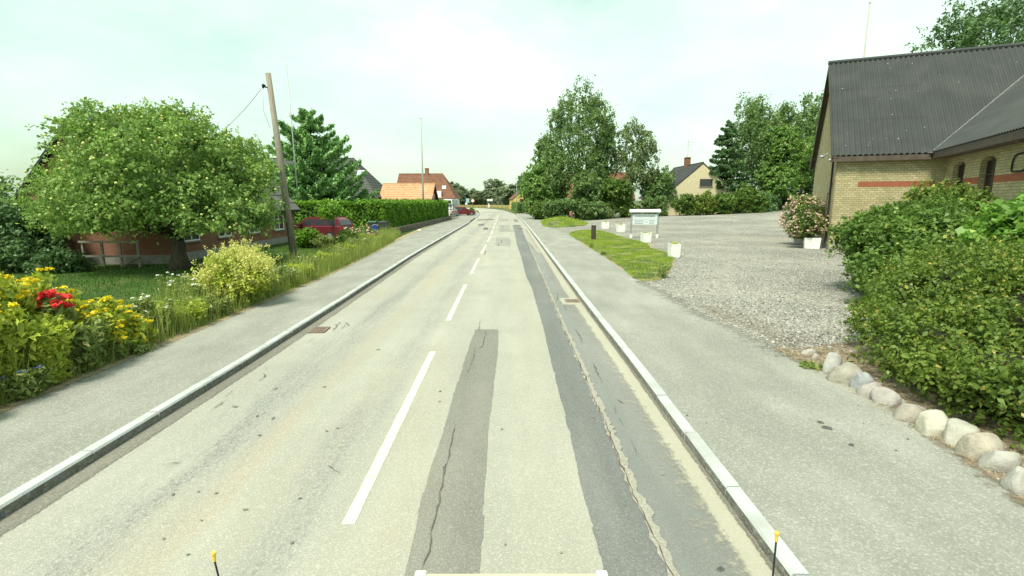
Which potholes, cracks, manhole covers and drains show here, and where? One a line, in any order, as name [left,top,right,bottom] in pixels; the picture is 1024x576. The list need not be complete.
crack [540,272,674,576]
crack [422,427,455,566]
